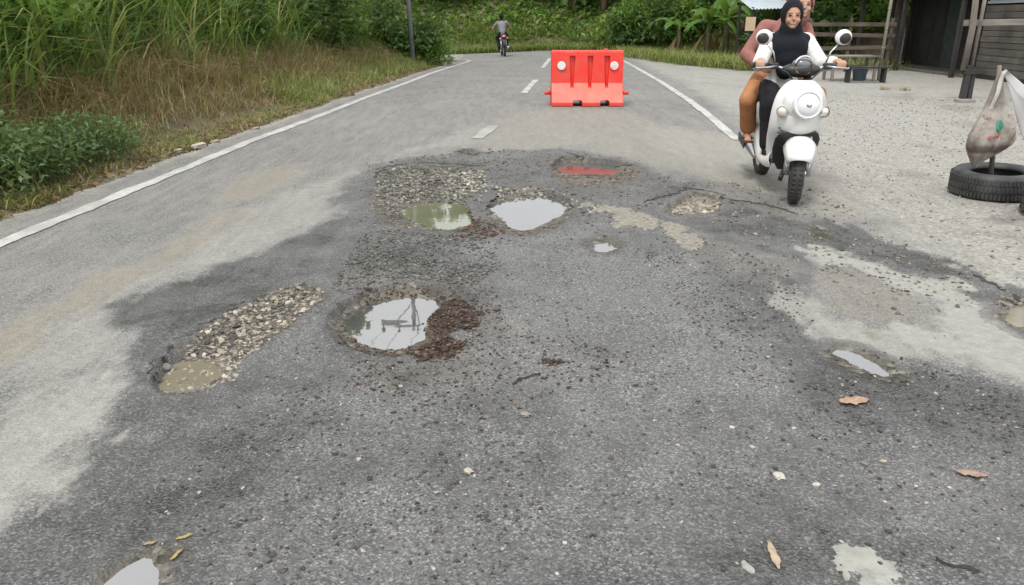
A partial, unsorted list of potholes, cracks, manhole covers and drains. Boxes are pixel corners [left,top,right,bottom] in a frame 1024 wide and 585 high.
pothole [977,287,1024,340]
pothole [137,279,341,402]
pothole [655,190,734,219]
pothole [540,154,647,189]
pothole [466,184,602,240]
pothole [358,163,506,239]
pothole [313,278,482,364]
